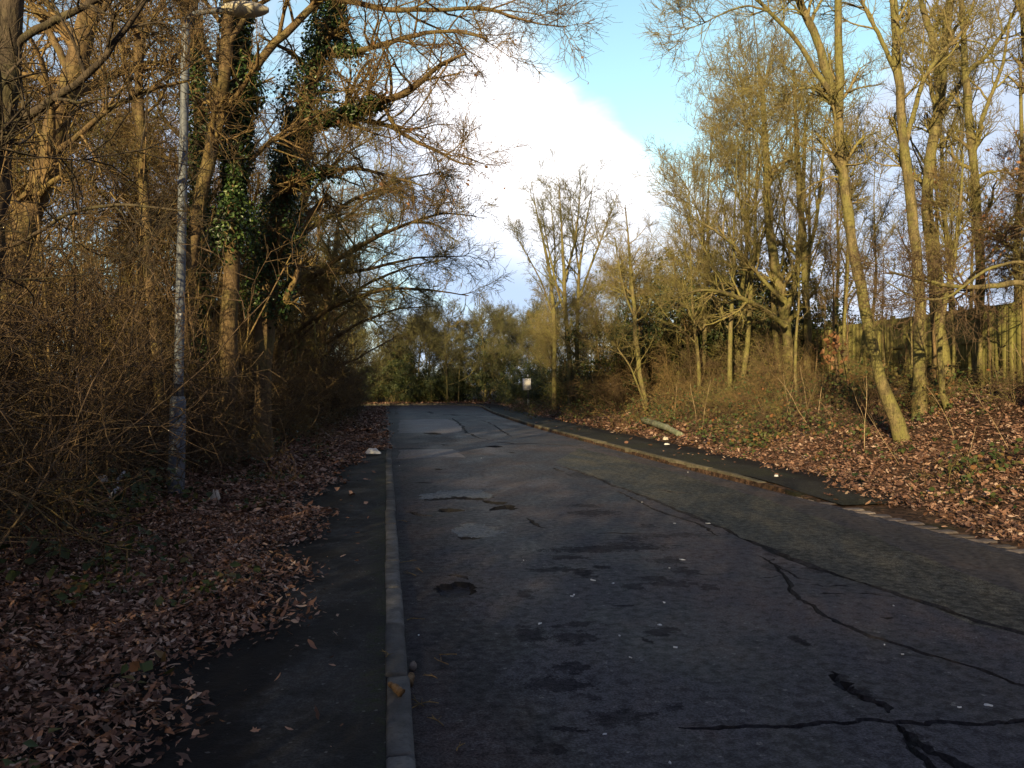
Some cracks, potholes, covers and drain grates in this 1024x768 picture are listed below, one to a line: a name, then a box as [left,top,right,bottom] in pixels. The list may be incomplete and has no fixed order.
crack [678,556,1024,768]
pothole [433,582,477,598]
crack [427,412,583,447]
crack [610,490,717,536]
